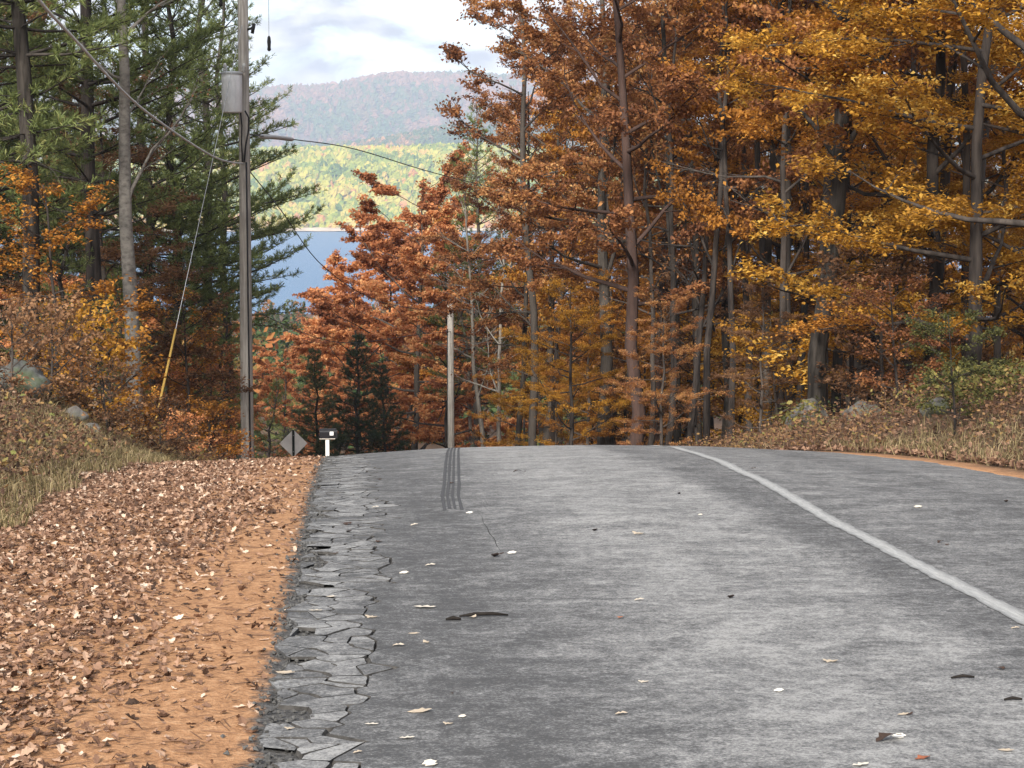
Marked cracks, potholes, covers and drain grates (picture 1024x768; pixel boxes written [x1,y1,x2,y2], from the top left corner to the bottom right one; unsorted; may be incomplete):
crack [269,454,401,768]
